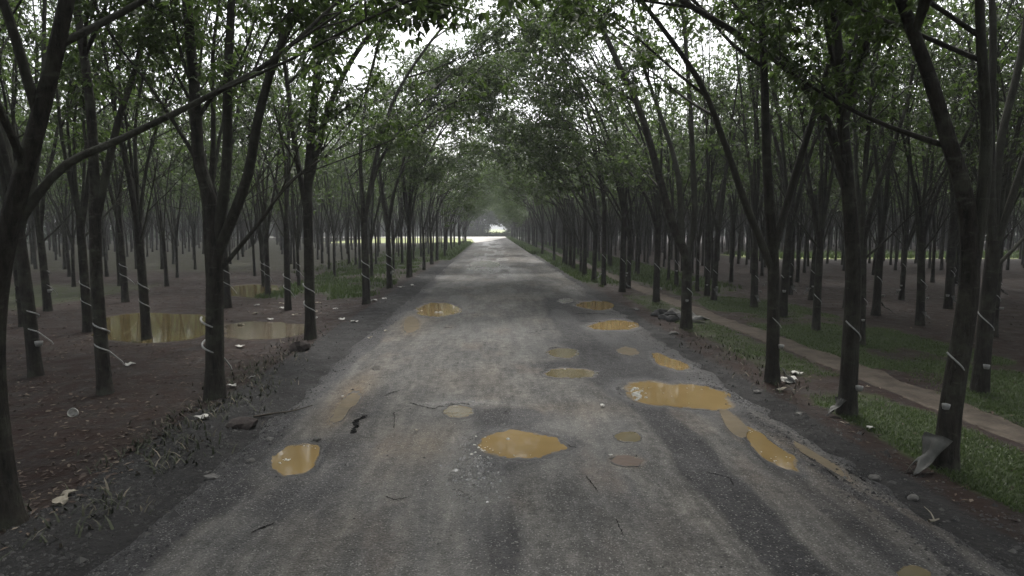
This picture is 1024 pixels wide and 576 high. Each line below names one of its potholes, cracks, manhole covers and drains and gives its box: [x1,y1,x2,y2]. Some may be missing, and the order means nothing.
pothole [265,440,324,479]
pothole [414,302,462,318]
pothole [544,347,580,359]
pothole [467,425,574,461]
pothole [616,346,640,356]
pothole [329,390,362,424]
